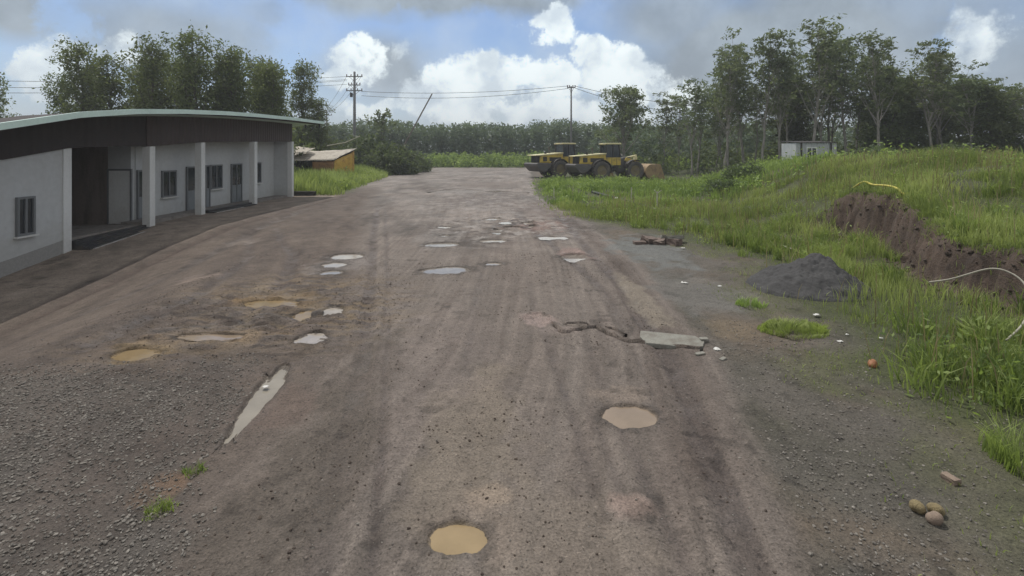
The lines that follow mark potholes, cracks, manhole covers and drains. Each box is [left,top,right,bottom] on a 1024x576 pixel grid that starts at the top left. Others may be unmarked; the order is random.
pothole [209,360,294,456]
pothole [414,265,474,276]
pothole [236,296,308,311]
pothole [311,304,351,318]
pothole [589,400,669,435]
pothole [284,308,324,322]
pothole [169,329,255,345]
pothole [414,512,500,567]
pothole [100,344,170,365]
pothole [286,328,334,347]
pothole [556,253,595,264]
crack [545,320,700,353]
